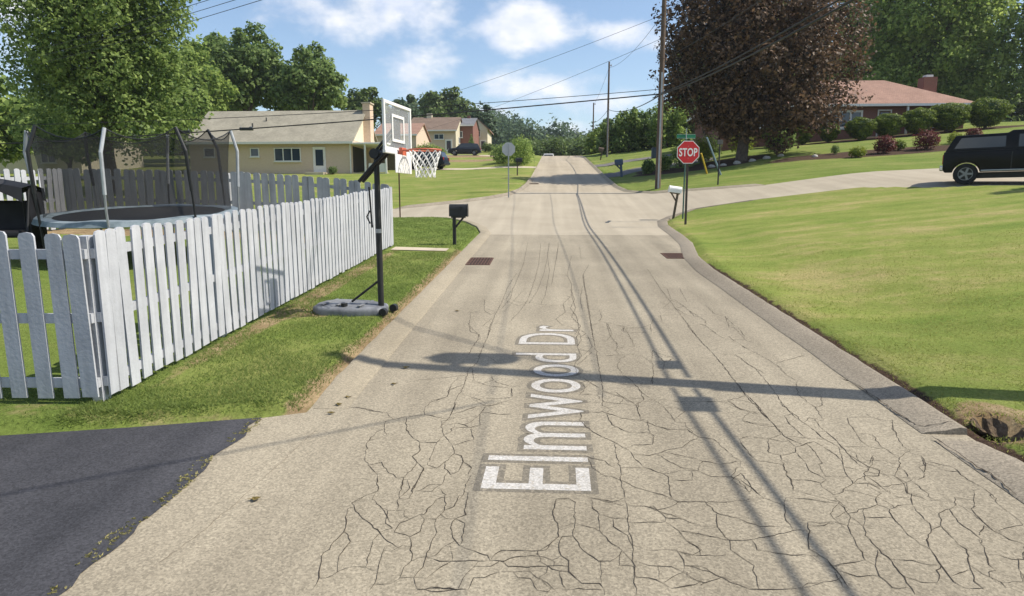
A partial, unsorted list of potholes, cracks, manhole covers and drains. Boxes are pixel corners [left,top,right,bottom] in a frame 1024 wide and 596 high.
drain grate [465,257,494,265]
crack [529,244,1024,593]
crack [314,243,556,592]
